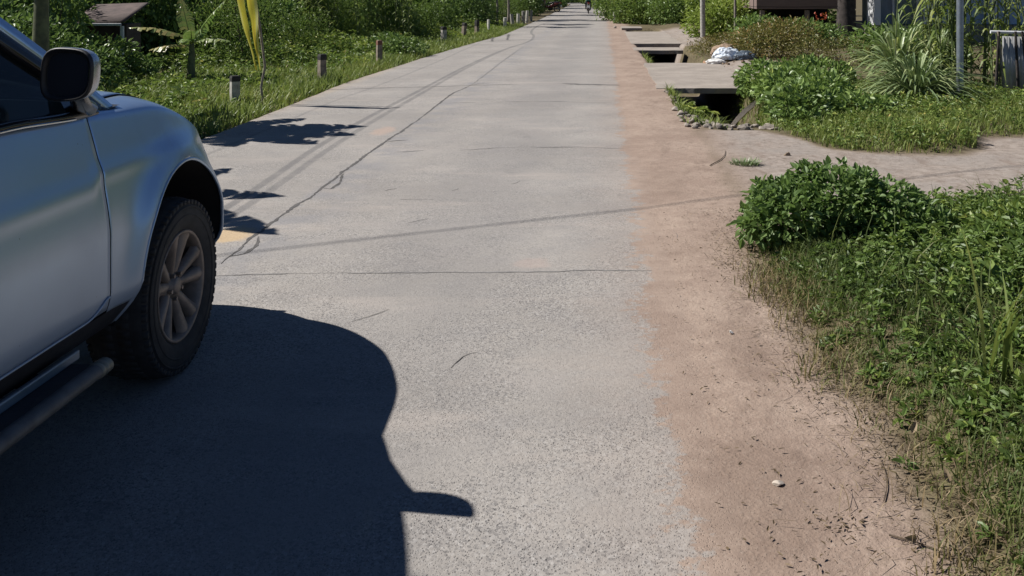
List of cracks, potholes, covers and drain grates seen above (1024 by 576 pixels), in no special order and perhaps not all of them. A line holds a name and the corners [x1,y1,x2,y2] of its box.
crack [221,34,530,264]
